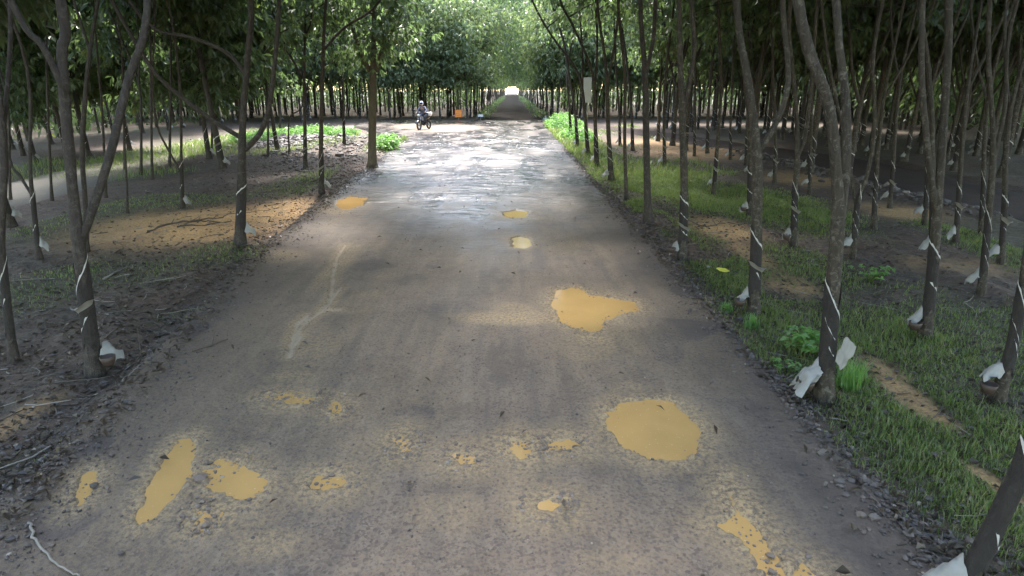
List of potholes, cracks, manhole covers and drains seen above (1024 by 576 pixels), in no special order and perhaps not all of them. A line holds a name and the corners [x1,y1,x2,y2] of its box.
crack [283,243,349,359]
